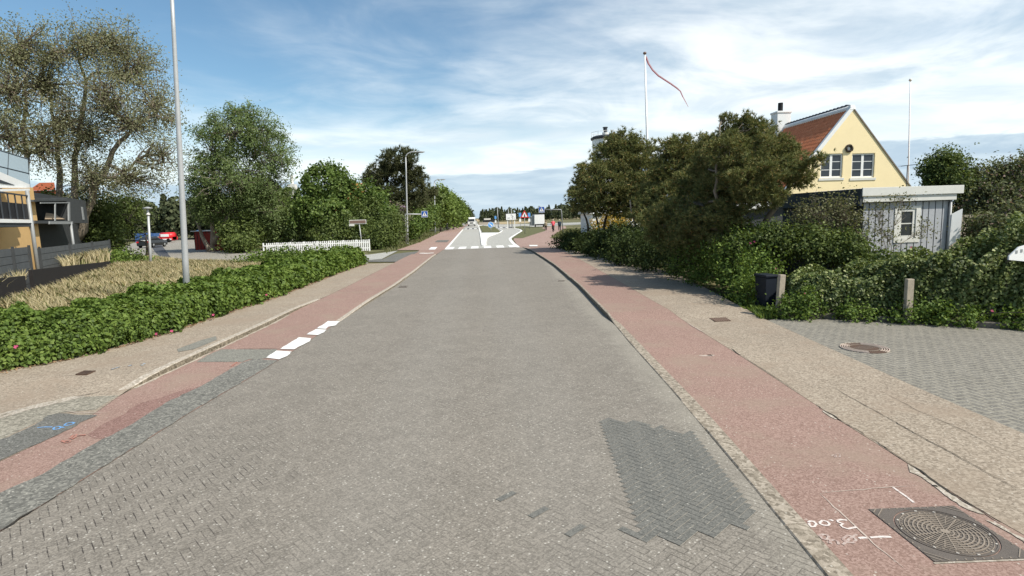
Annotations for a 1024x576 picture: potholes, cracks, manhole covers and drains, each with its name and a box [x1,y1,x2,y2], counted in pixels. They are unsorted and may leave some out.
manhole cover [869,505,1024,562]
manhole cover [840,342,890,354]
